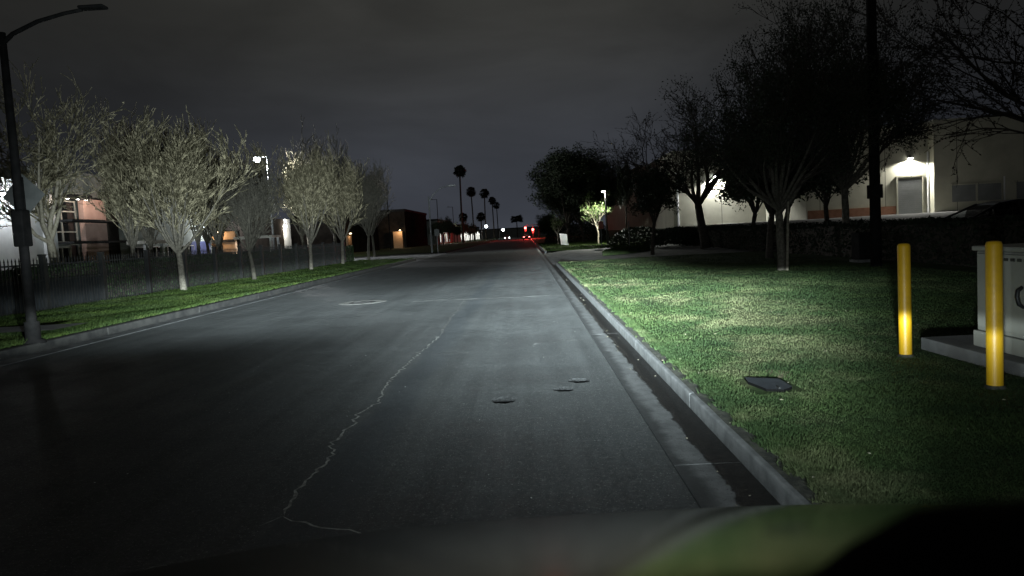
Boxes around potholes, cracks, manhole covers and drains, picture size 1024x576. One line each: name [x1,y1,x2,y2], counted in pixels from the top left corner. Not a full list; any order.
crack [260,295,550,533]
pothole [492,396,516,404]
